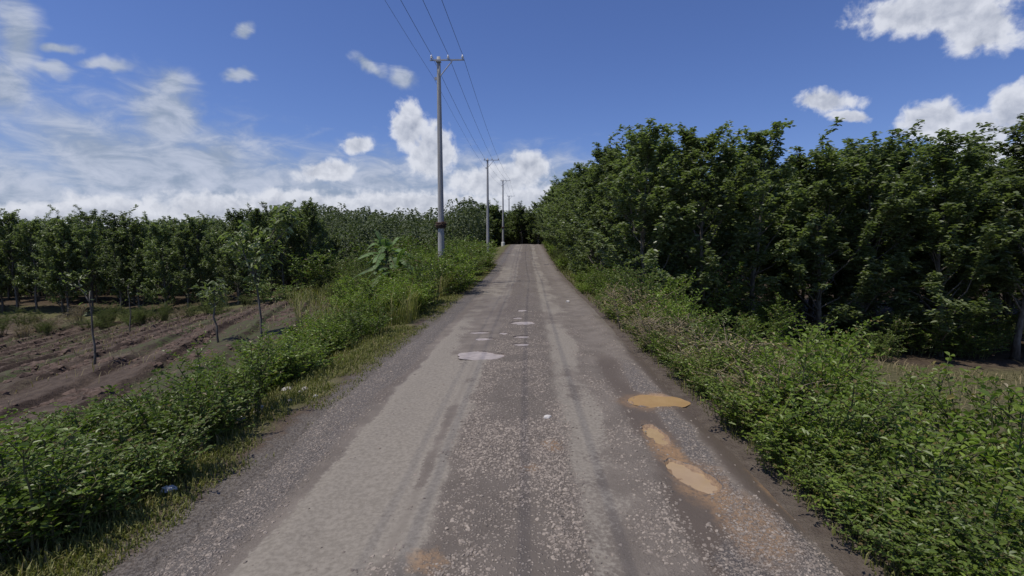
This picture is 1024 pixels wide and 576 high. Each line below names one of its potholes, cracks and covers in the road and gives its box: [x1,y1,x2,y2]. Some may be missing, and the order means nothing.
pothole [621,392,691,410]
pothole [654,452,737,501]
pothole [635,419,681,455]
